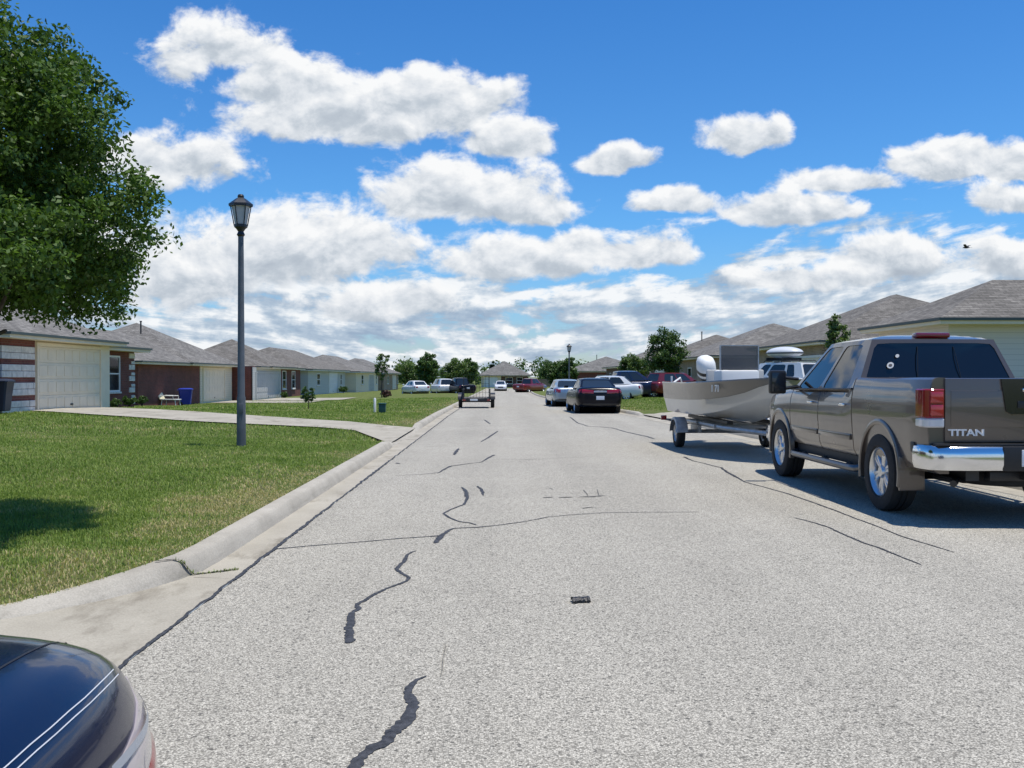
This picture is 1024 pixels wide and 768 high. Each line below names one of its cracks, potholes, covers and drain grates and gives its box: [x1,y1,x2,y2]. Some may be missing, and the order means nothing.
crack [684,457,953,552]
